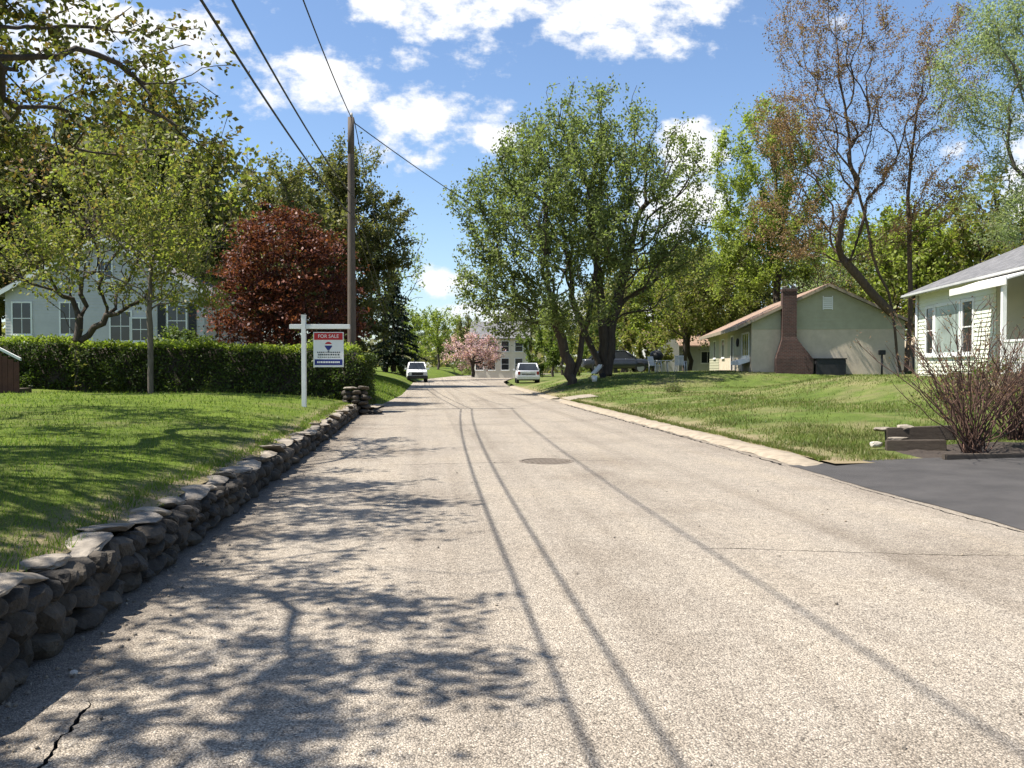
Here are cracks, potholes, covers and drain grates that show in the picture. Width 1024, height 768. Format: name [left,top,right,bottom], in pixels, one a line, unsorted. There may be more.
crack [37,699,91,768]
